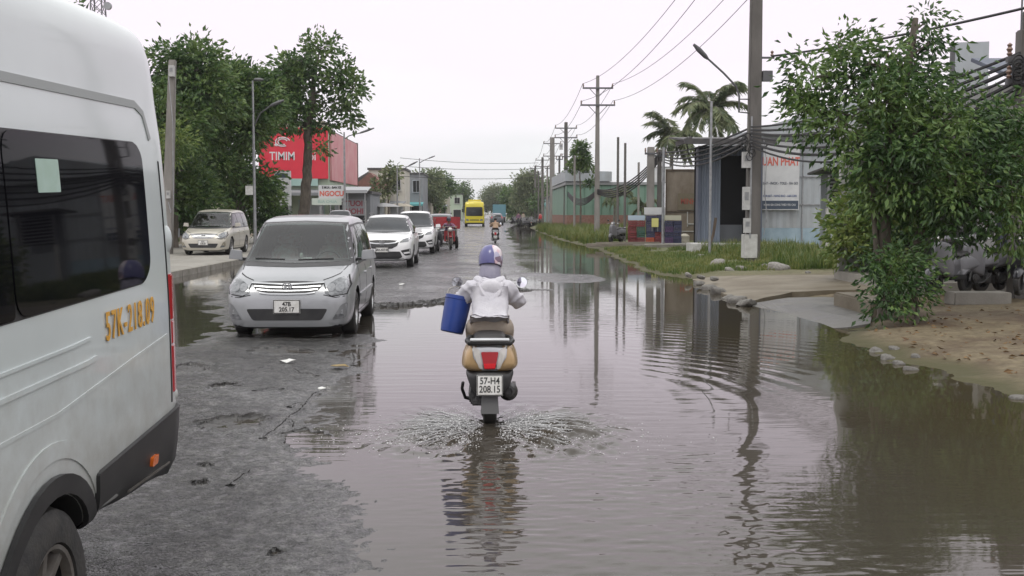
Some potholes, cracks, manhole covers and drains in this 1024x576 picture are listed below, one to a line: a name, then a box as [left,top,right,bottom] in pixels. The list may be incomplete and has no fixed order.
crack [226,469,255,485]
pothole [203,381,243,389]
pothole [181,412,281,436]
crack [254,368,327,438]
